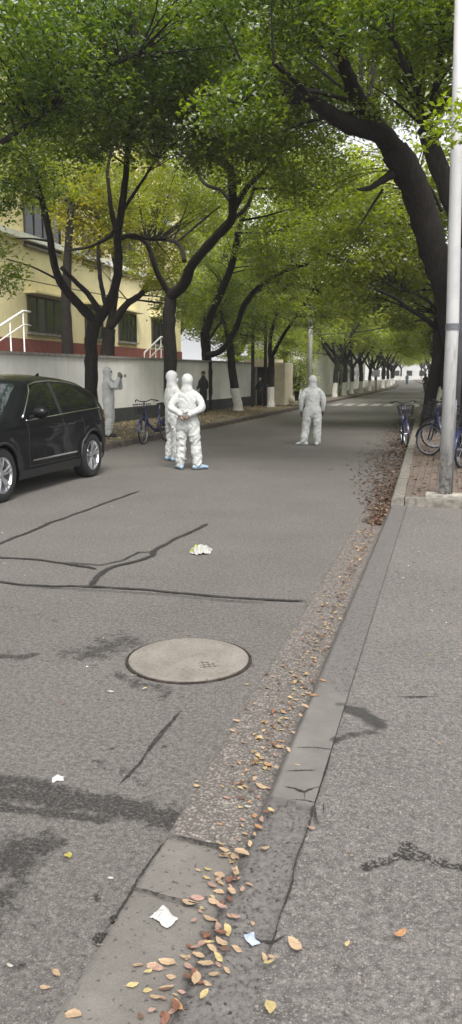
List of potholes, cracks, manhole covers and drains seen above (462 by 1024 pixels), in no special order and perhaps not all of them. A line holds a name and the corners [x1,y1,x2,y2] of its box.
crack [121,712,179,782]
manhole cover [125,638,252,685]
